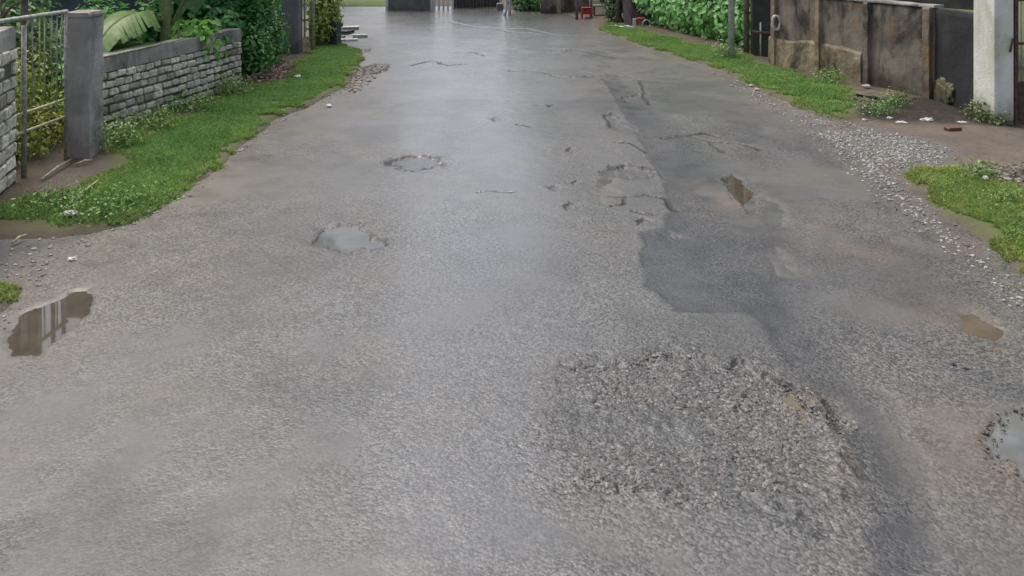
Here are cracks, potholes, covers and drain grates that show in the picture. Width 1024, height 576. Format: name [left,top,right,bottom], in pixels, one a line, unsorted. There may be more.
crack [608,194,678,216]
pothole [383,153,450,172]
pothole [597,163,656,181]
crack [410,52,484,66]
crack [449,21,647,96]
crack [660,132,761,154]
pothole [307,221,390,254]
pothole [720,174,760,215]
